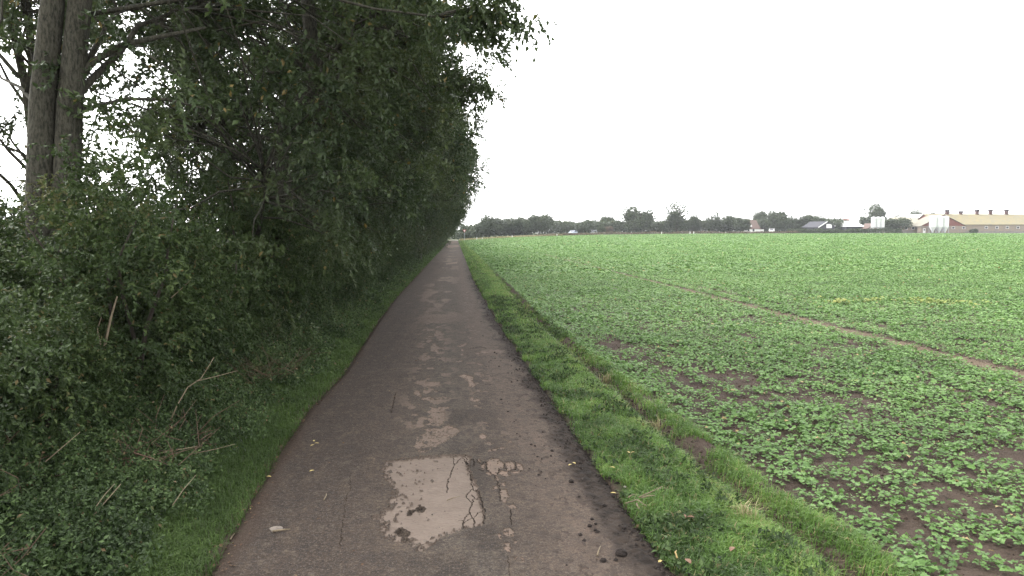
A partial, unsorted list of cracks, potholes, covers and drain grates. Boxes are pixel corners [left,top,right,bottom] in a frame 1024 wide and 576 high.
crack [446,455,519,527]
